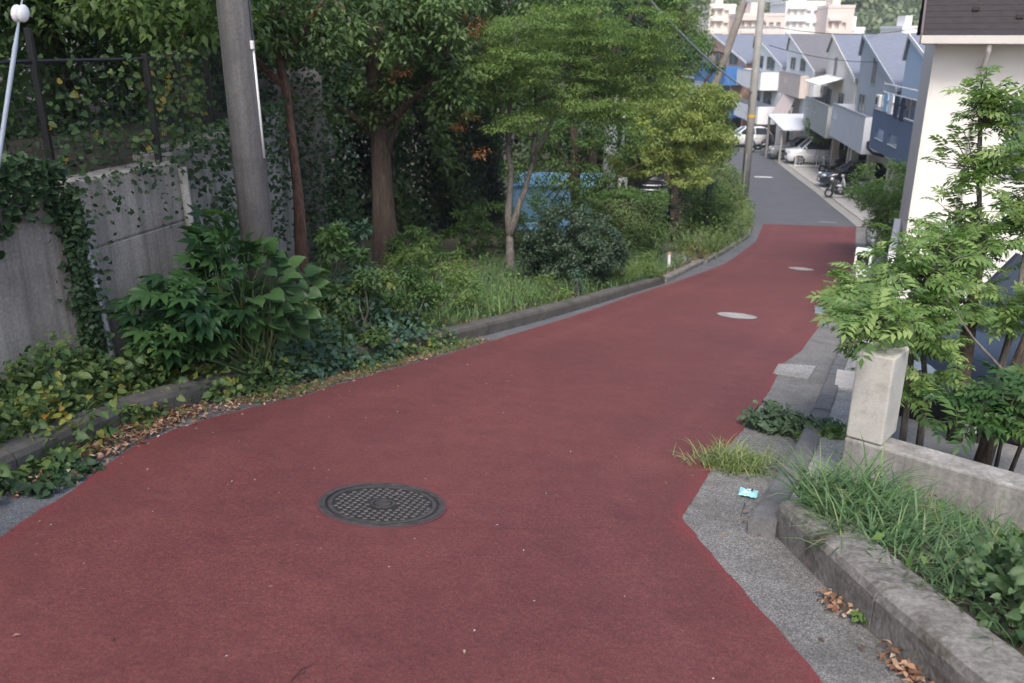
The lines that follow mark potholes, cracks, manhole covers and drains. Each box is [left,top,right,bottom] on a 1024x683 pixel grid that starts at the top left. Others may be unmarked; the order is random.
manhole cover [317,482,447,529]
